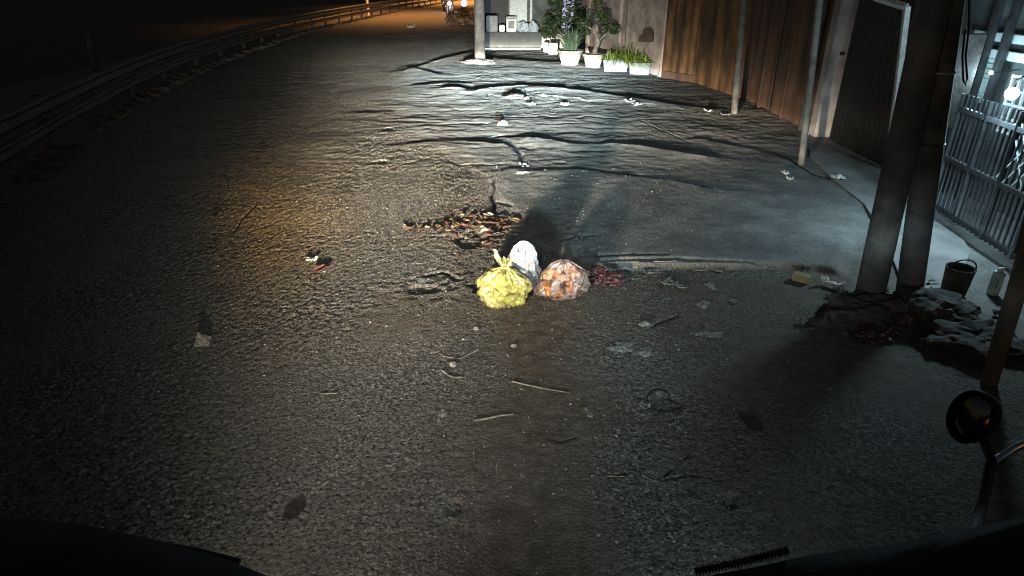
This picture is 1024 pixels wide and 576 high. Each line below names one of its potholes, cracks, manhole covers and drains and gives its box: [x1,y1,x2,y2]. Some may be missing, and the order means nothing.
crack [422,272,477,292]
crack [390,123,714,212]
pothole [459,232,487,249]
